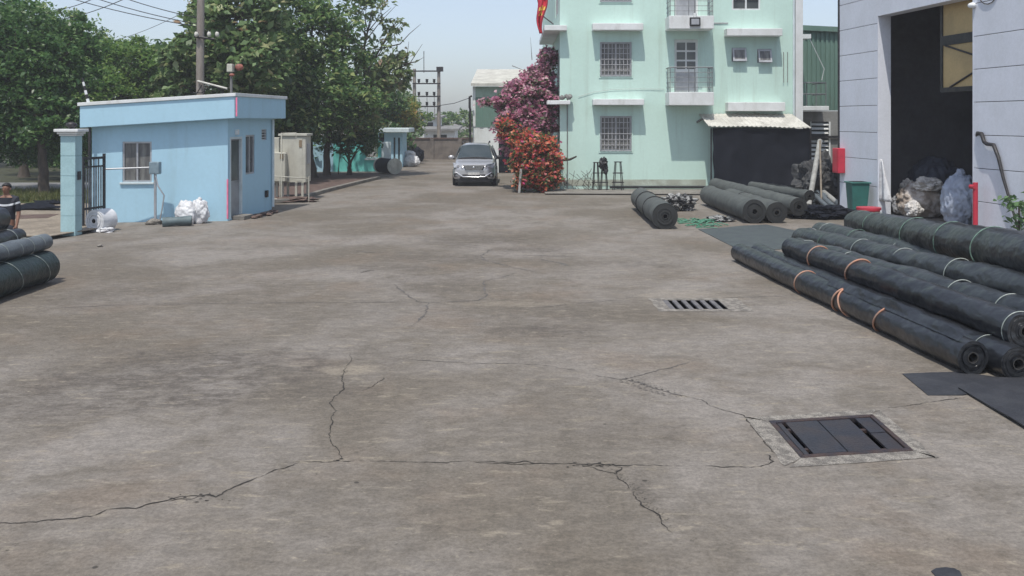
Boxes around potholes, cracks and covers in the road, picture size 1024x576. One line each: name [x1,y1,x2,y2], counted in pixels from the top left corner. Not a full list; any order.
crack [396,249,569,323]
crack [412,359,775,467]
crack [0,463,296,523]
crack [328,355,385,461]
manhole cover [744,409,936,467]
drain grate [648,298,753,311]
